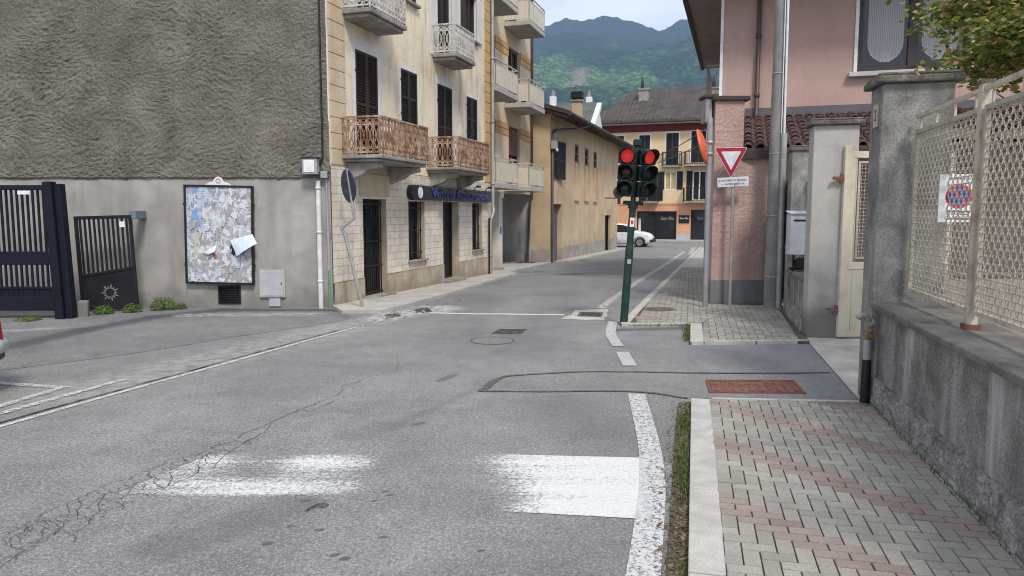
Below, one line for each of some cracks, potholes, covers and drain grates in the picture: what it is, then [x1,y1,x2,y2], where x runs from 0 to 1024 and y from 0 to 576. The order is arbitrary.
crack [0,439,250,567]
manhole cover [706,380,806,394]
manhole cover [470,337,515,345]
crack [238,368,397,442]
